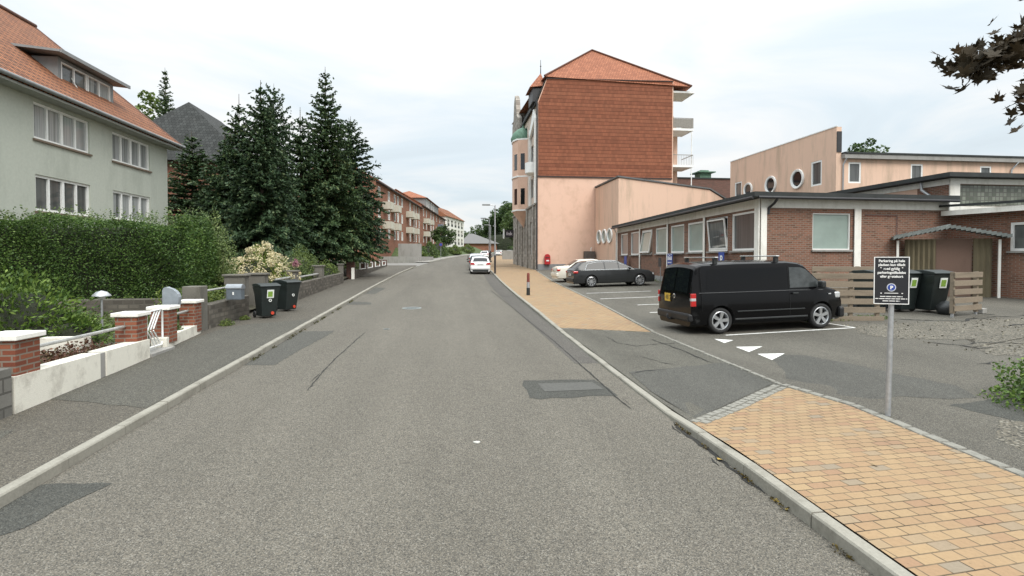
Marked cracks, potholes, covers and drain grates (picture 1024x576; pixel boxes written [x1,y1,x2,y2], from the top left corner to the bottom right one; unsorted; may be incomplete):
crack [925,314,1024,364]
crack [308,333,364,389]
crack [612,338,713,373]
